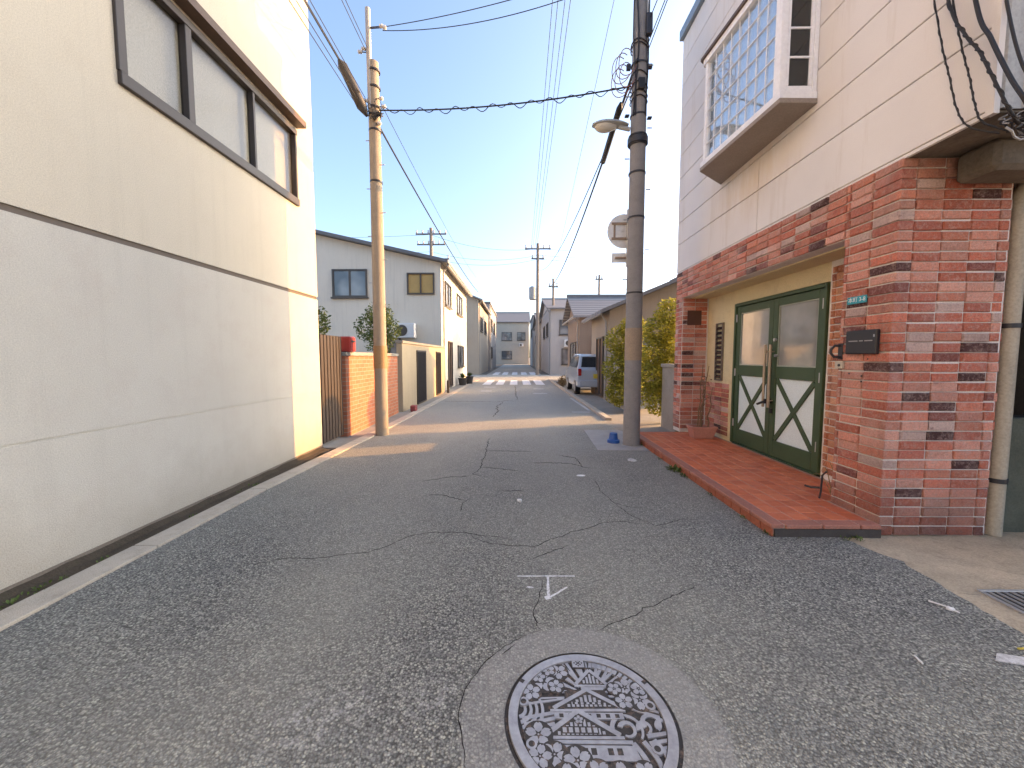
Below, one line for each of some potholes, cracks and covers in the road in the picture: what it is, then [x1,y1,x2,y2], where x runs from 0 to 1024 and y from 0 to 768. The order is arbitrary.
drain grate [977,589,1024,614]
crack [427,438,532,511]
crack [600,584,698,630]
manhole cover [504,654,684,768]
crack [245,455,684,564]
